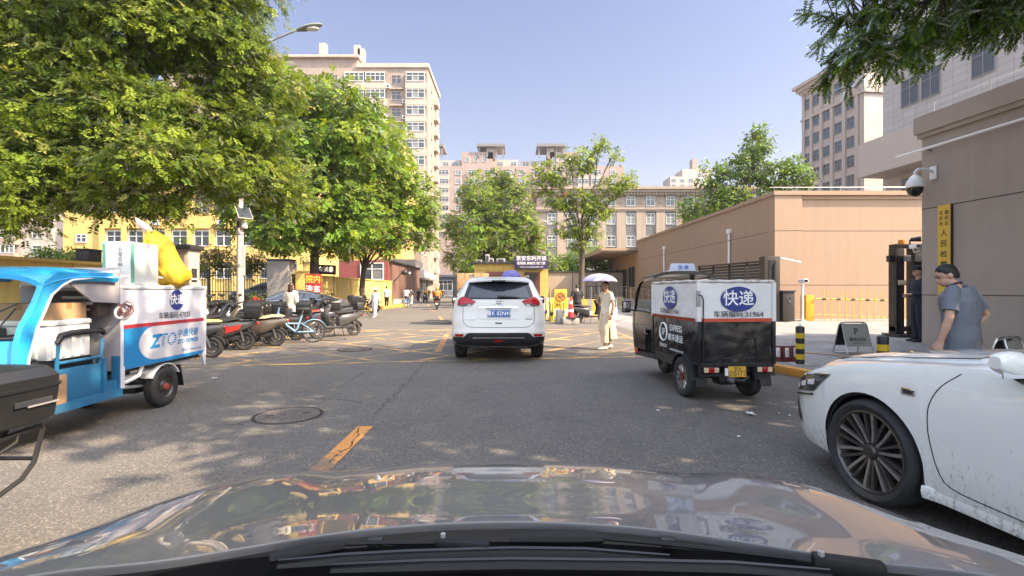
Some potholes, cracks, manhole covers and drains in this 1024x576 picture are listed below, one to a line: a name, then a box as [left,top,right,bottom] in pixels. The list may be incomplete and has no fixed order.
manhole cover [250,407,324,425]
